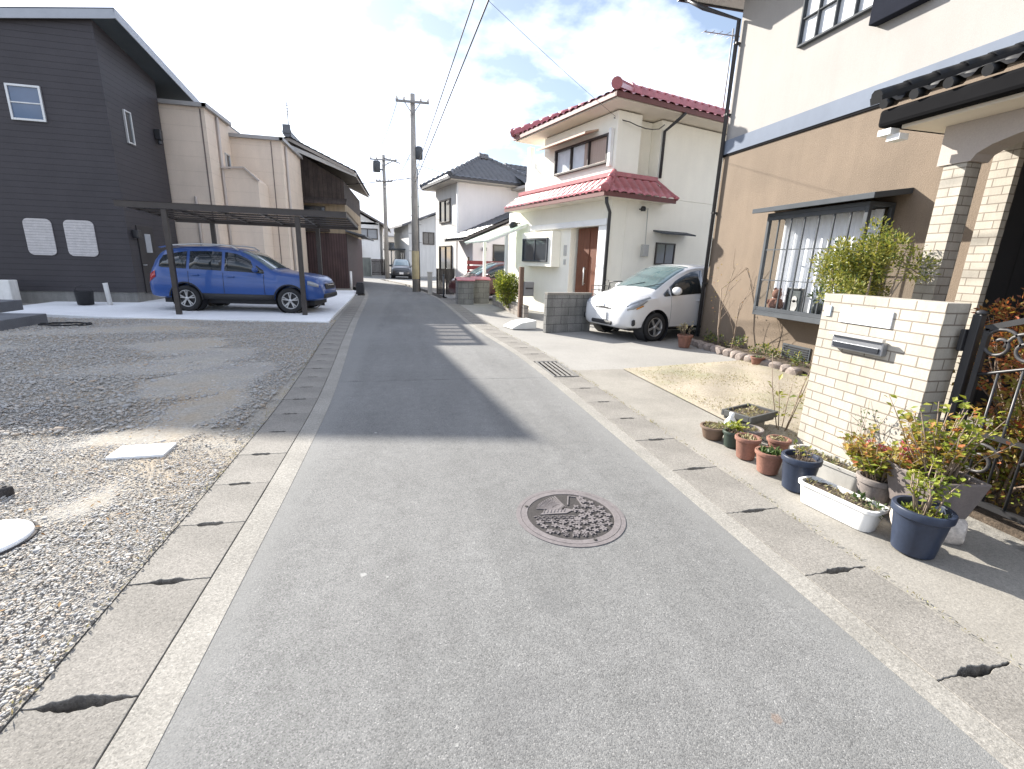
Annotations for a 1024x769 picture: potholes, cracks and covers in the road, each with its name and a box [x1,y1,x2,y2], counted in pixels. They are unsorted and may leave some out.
crack [21,695,139,713]
crack [807,567,863,576]
drain grate [535,361,579,377]
crack [937,663,1008,682]
crack [130,578,211,586]
manhole cover [516,489,626,548]
